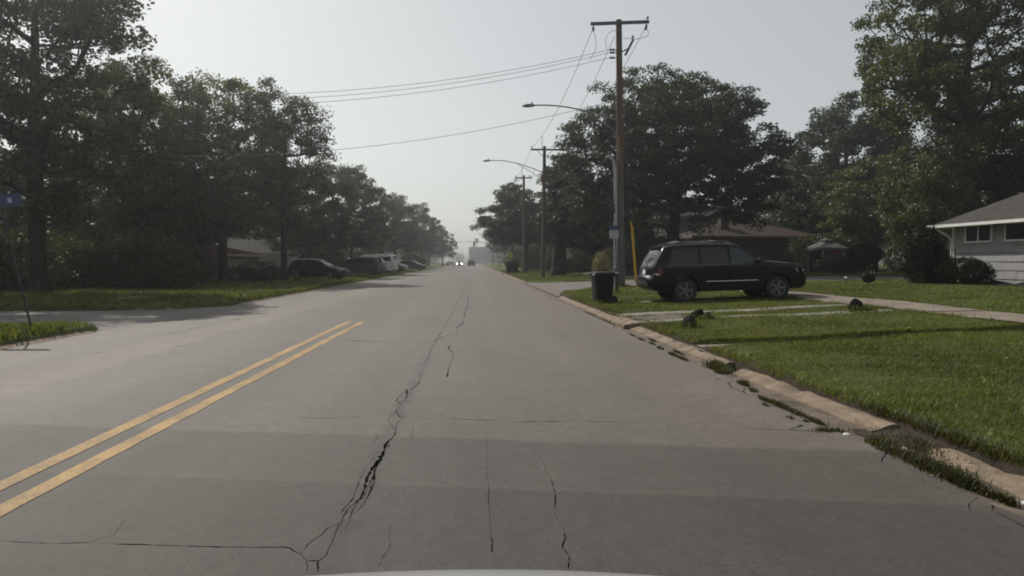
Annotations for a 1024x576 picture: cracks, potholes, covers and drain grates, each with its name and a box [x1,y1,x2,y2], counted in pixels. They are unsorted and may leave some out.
crack [346,297,469,377]
crack [881,454,1024,527]
crack [0,341,436,570]
crack [534,451,571,569]
